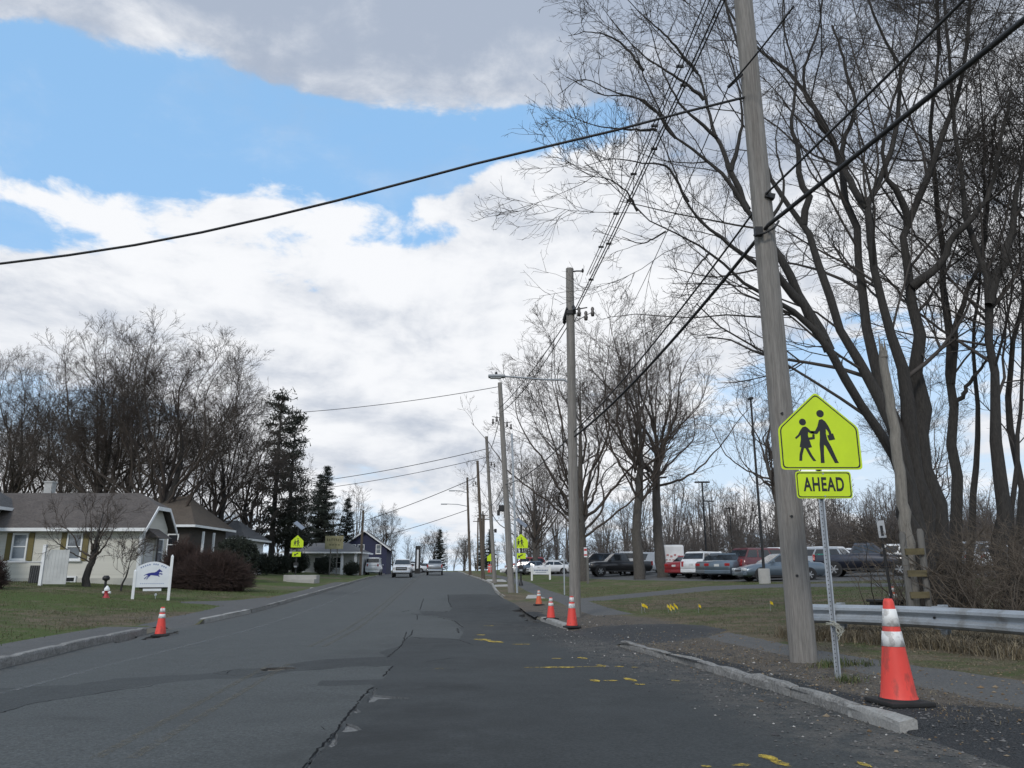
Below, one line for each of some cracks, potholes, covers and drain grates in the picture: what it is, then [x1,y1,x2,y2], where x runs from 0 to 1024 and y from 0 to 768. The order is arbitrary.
crack [302,596,473,768]
